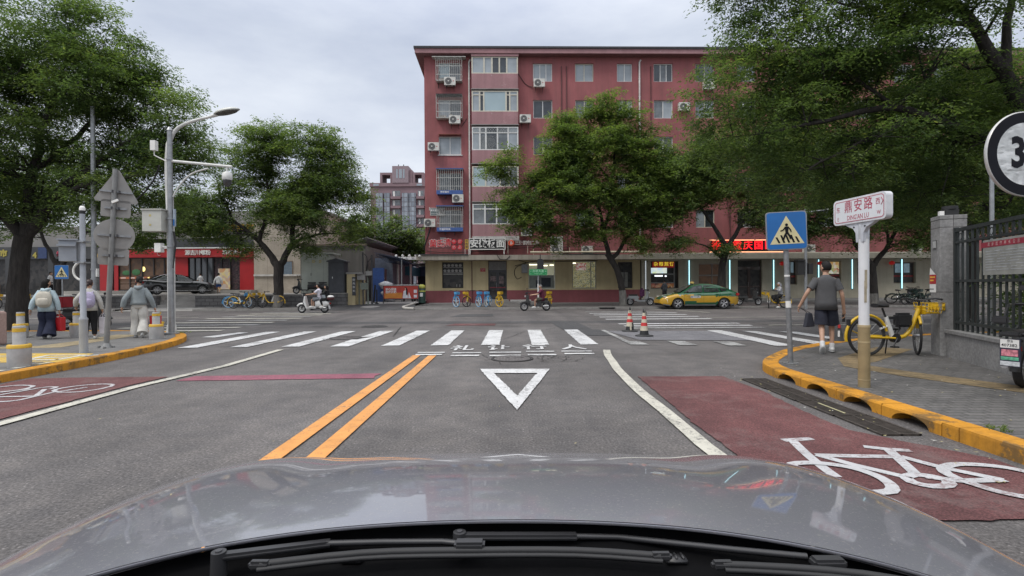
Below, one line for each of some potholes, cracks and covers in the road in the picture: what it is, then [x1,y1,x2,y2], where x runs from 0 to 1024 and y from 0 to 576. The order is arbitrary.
drain grate [741,378,792,389]
drain grate [834,415,922,436]
drain grate [766,388,825,401]
drain grate [796,400,867,416]
